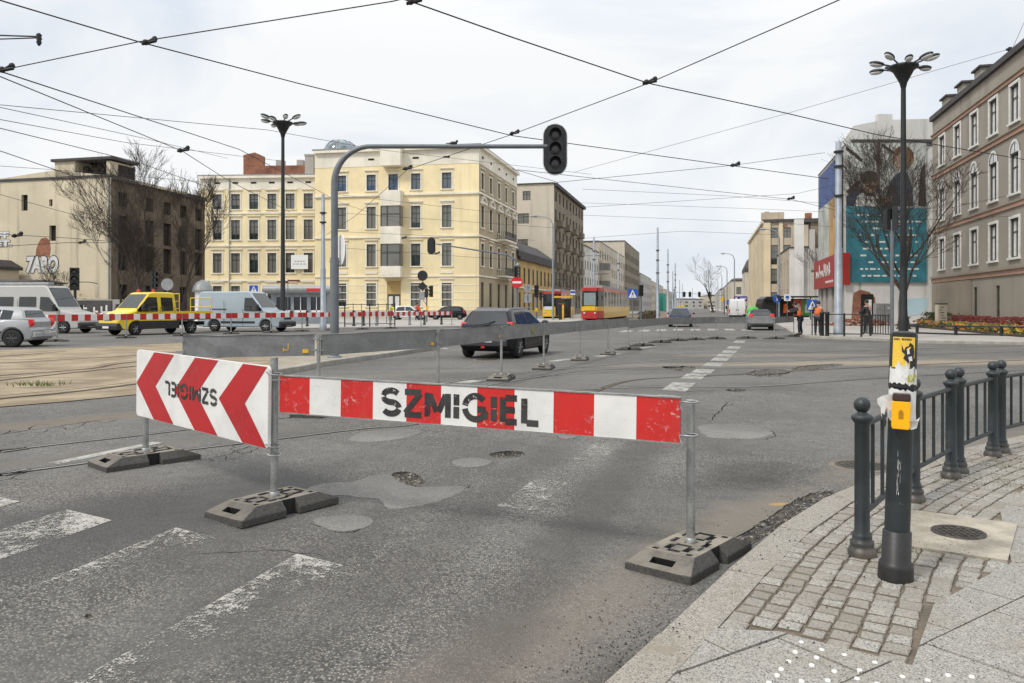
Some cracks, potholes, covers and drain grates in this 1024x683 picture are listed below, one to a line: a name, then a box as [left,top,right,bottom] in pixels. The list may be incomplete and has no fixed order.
manhole cover [910,510,1018,562]
pothole [747,369,790,377]
pothole [392,471,426,487]
crack [205,444,258,461]
manhole cover [828,459,886,473]
pothole [489,450,524,459]
